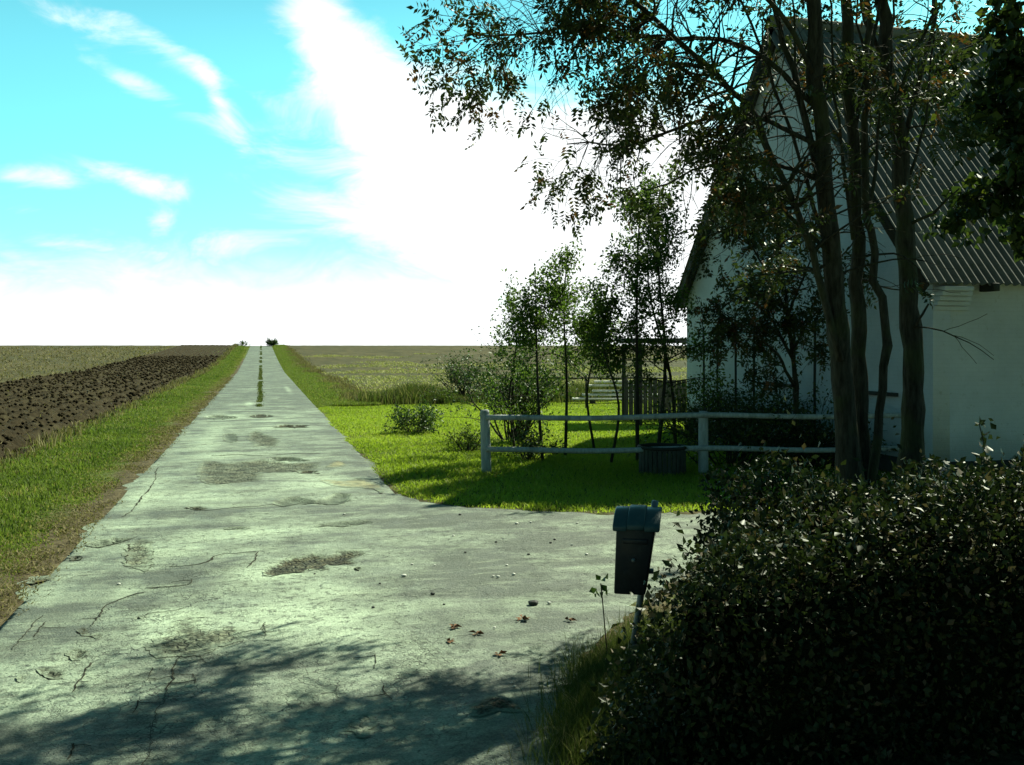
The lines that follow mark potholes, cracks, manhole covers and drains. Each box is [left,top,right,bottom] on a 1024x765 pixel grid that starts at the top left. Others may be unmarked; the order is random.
pothole [223,433,238,443]
crack [12,616,62,648]
crack [122,467,159,517]
crack [133,649,213,765]
crack [72,662,93,692]
pothole [262,549,365,576]
crack [83,551,259,627]
pothole [247,430,281,447]
